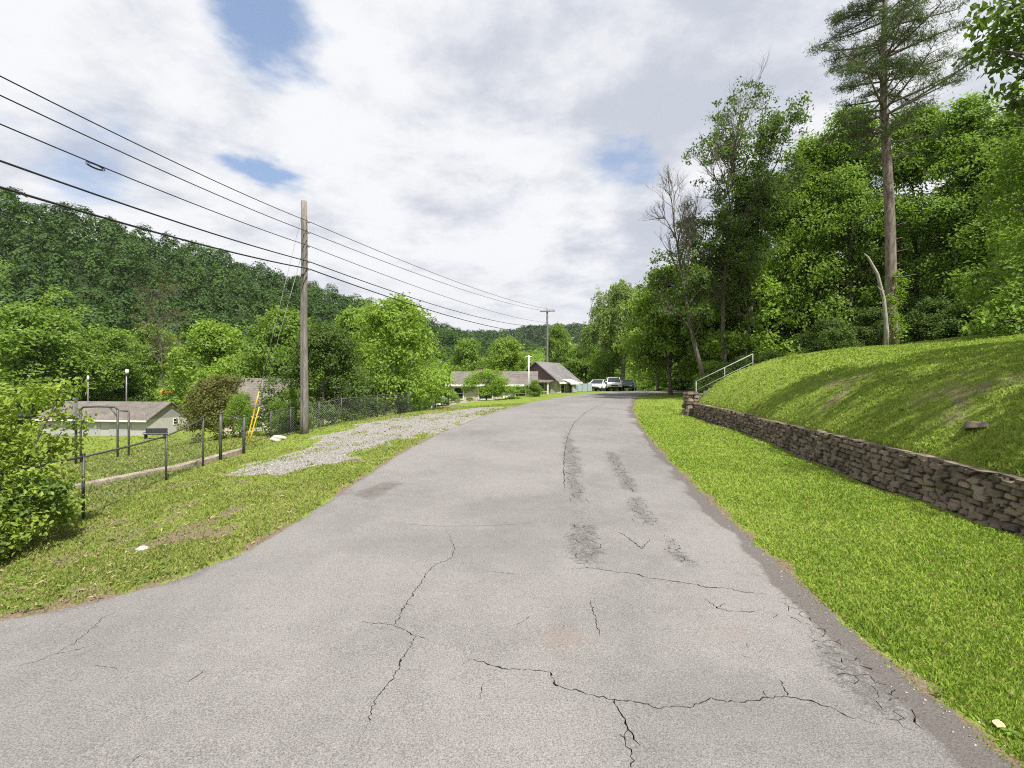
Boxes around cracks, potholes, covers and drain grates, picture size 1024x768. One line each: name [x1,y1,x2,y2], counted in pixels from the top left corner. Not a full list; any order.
crack [773,598,921,731]
crack [20,612,116,666]
crack [456,659,887,767]
crack [571,451,766,613]
crack [355,533,455,746]
